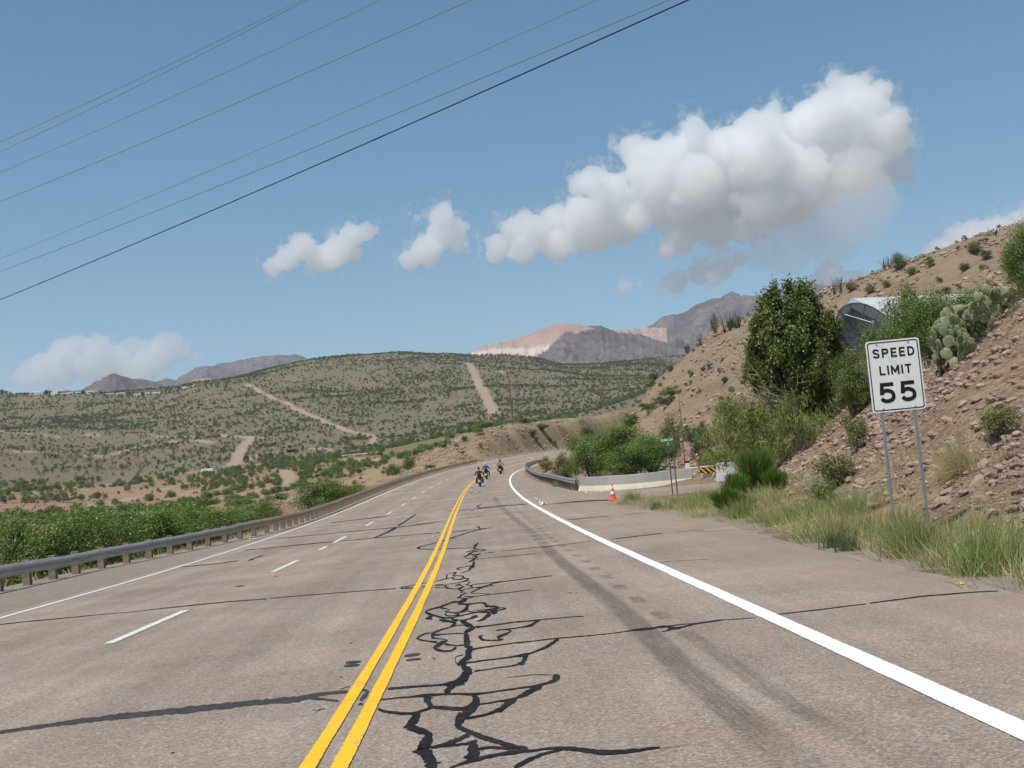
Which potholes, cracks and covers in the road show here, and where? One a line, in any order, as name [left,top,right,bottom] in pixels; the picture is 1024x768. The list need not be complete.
crack [476,530,695,560]
